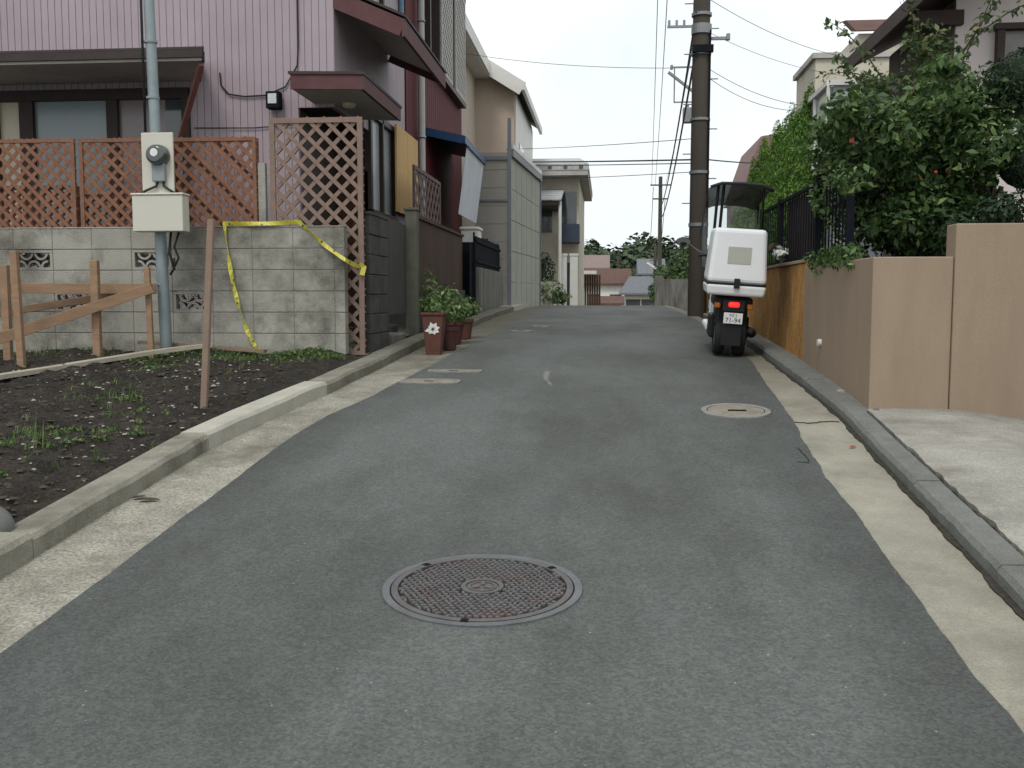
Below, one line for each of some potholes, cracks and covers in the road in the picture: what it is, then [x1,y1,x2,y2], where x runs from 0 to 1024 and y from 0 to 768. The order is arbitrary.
manhole cover [701,403,771,419]
manhole cover [382,554,582,628]
